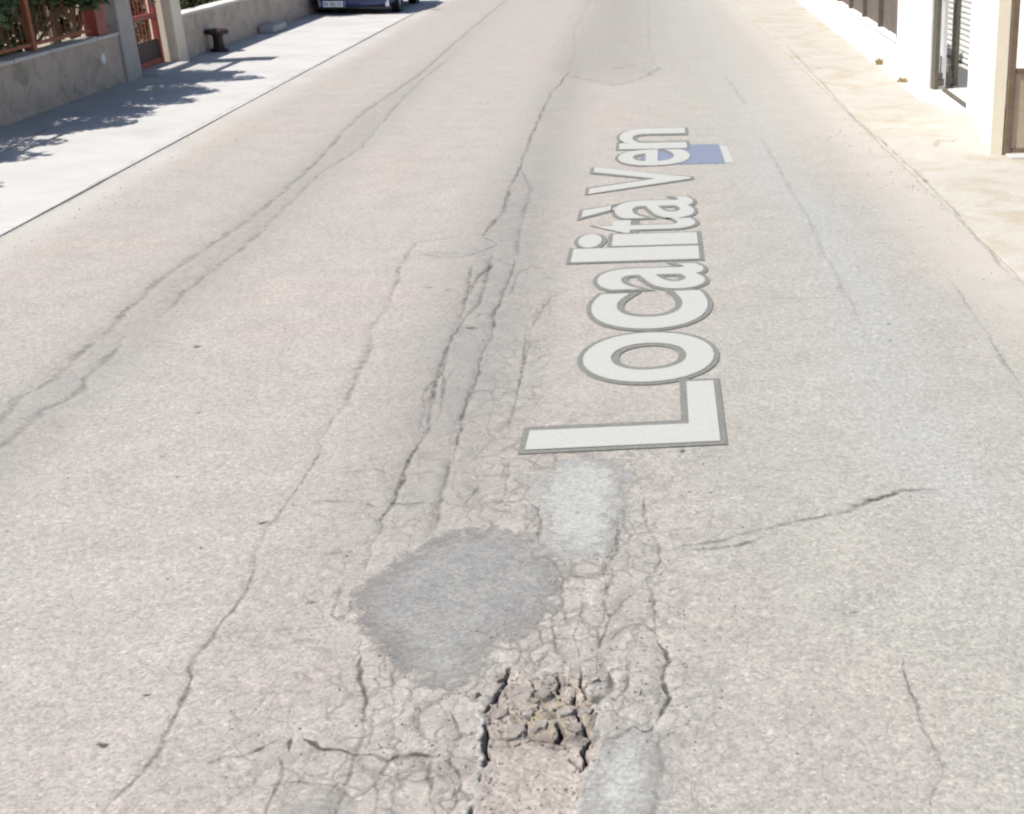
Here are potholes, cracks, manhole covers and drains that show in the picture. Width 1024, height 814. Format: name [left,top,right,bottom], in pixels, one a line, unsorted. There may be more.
crack [207,738,428,763]
crack [639,642,671,732]
crack [357,643,367,710]
pothole [462,659,610,814]
crack [864,492,896,504]
crack [592,634,615,725]
